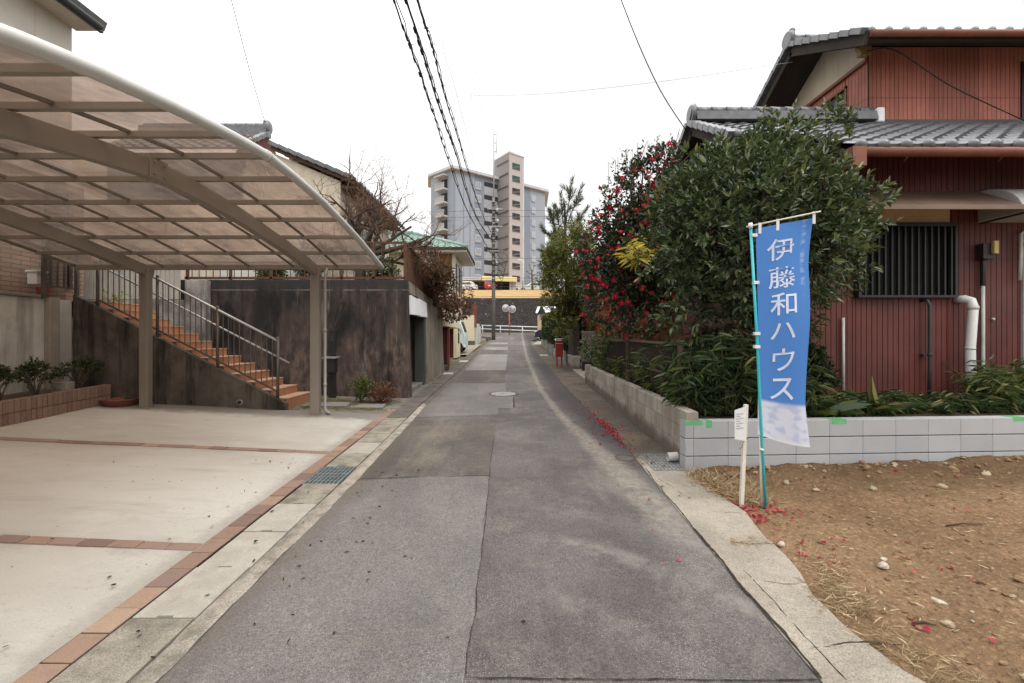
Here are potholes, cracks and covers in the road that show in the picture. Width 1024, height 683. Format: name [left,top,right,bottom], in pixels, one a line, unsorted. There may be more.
drain grate [302,467,355,486]
drain grate [640,455,686,471]
